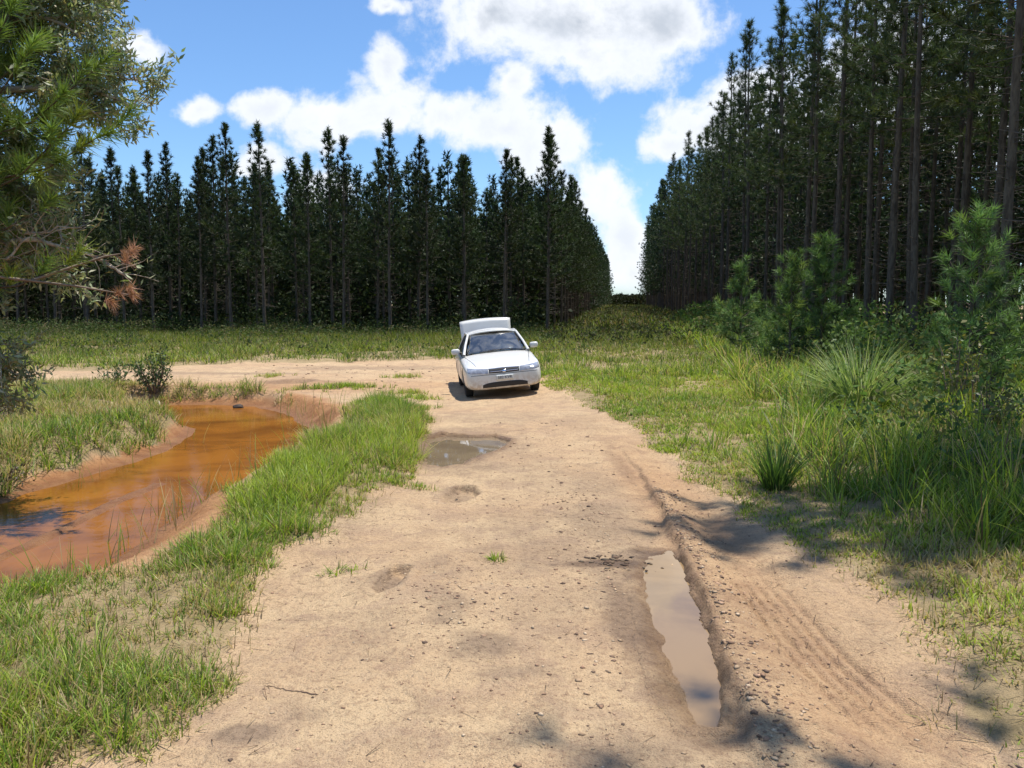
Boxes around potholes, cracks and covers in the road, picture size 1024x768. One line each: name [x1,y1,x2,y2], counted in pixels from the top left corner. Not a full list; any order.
pothole [623,544,741,738]
pothole [416,431,516,468]
pothole [432,484,488,506]
pothole [358,563,423,597]
